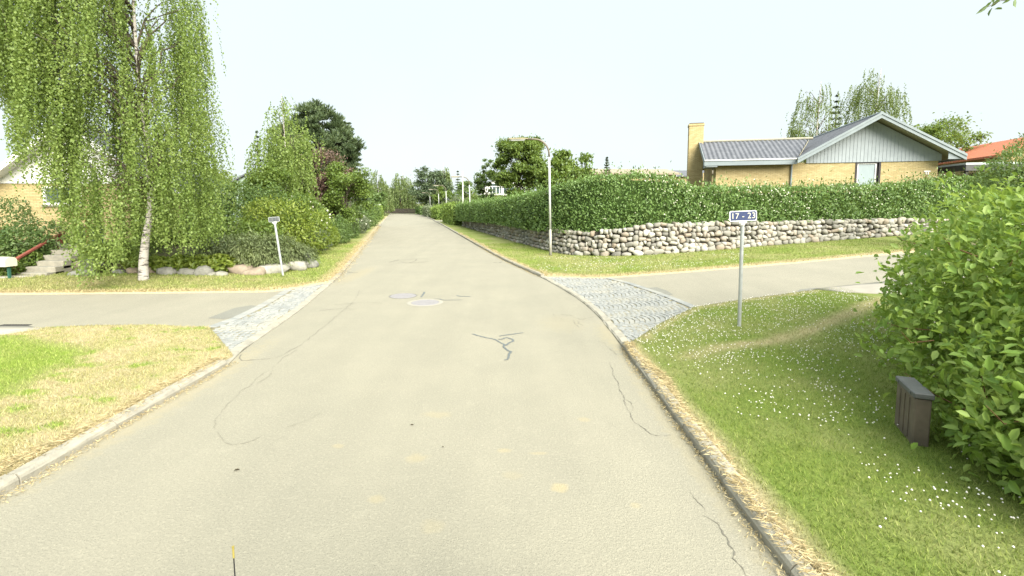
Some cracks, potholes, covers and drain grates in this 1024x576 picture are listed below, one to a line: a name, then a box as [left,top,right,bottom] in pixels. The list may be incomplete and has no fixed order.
crack [690,491,746,575]
crack [214,290,362,444]
crack [609,348,675,436]
